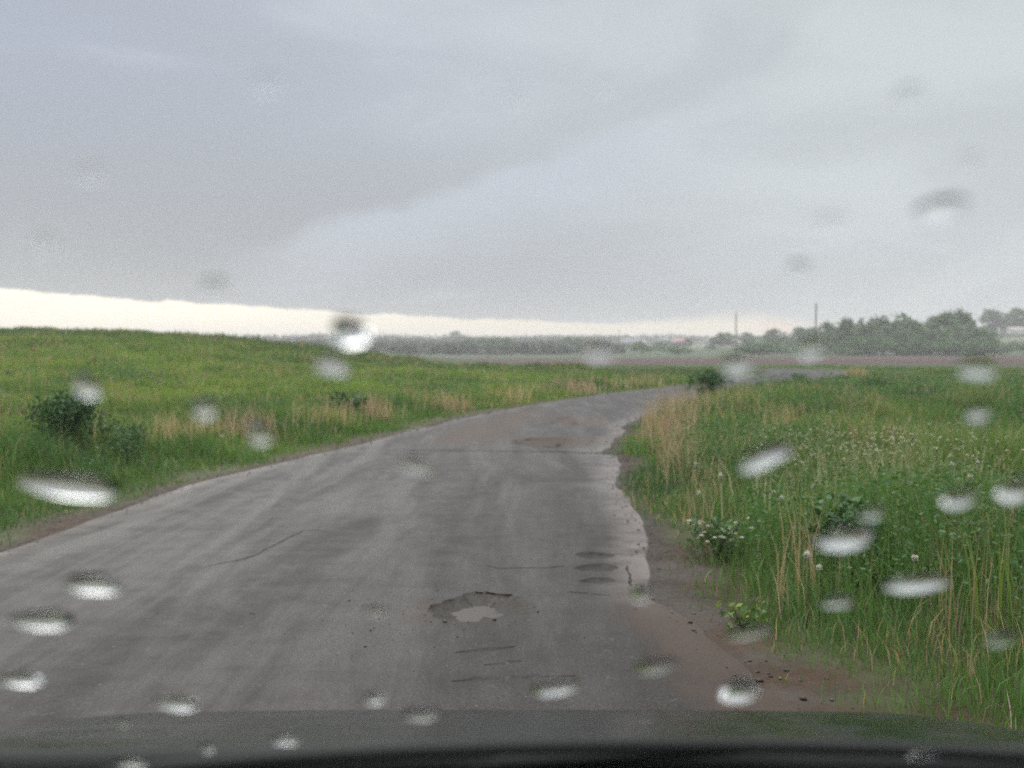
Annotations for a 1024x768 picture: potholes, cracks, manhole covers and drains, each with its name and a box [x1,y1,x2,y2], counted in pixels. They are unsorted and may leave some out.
pothole [511,437,594,449]
pothole [574,563,618,571]
crack [566,566,633,596]
crack [451,646,576,682]
pothole [427,591,537,622]
crack [210,530,313,566]
